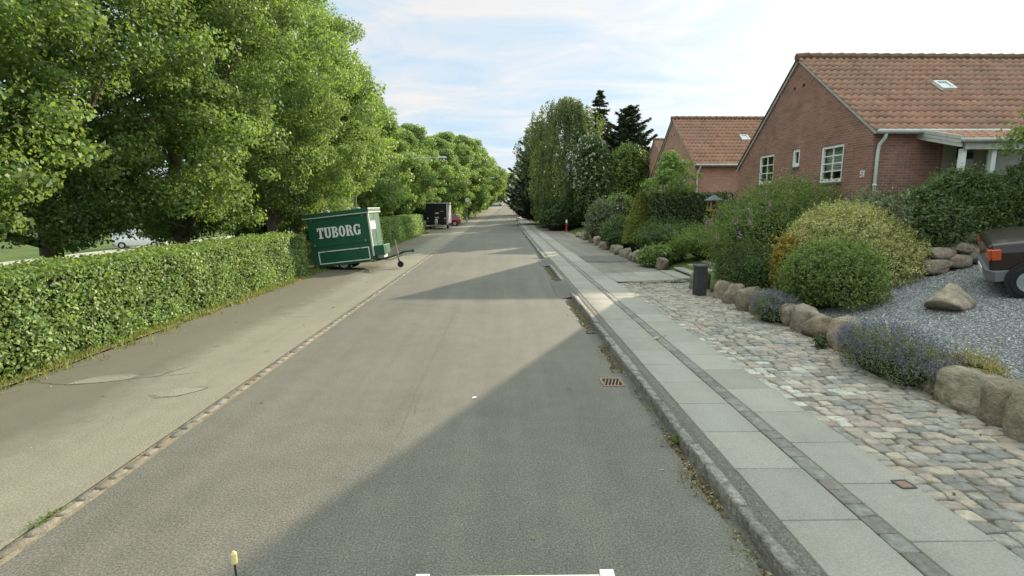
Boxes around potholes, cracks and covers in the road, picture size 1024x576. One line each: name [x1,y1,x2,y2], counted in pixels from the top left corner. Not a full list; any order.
utility cover [890,479,918,489]
drain grate [599,378,626,387]
